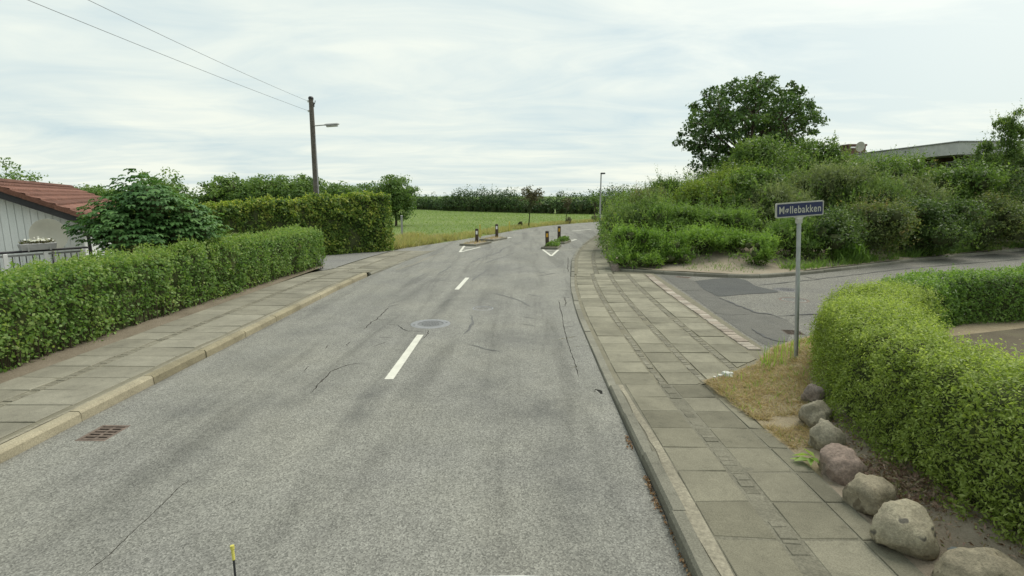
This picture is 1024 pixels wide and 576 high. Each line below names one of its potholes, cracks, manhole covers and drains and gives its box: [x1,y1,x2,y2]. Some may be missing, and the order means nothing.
crack [304,308,407,392]
drain grate [75,425,131,441]
manhole cover [410,319,450,329]
crack [85,481,188,574]
